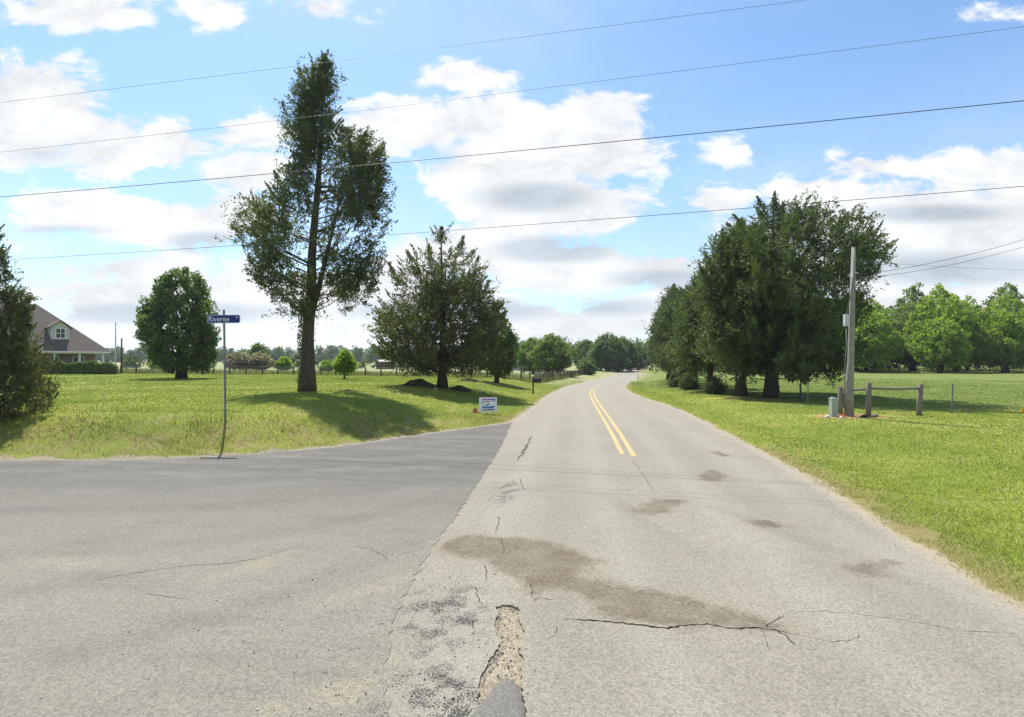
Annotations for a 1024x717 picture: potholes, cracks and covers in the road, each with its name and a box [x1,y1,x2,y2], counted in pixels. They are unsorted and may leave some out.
crack [472,516,505,628]
crack [550,610,1012,646]
pothole [477,605,527,714]
crack [502,437,531,490]
